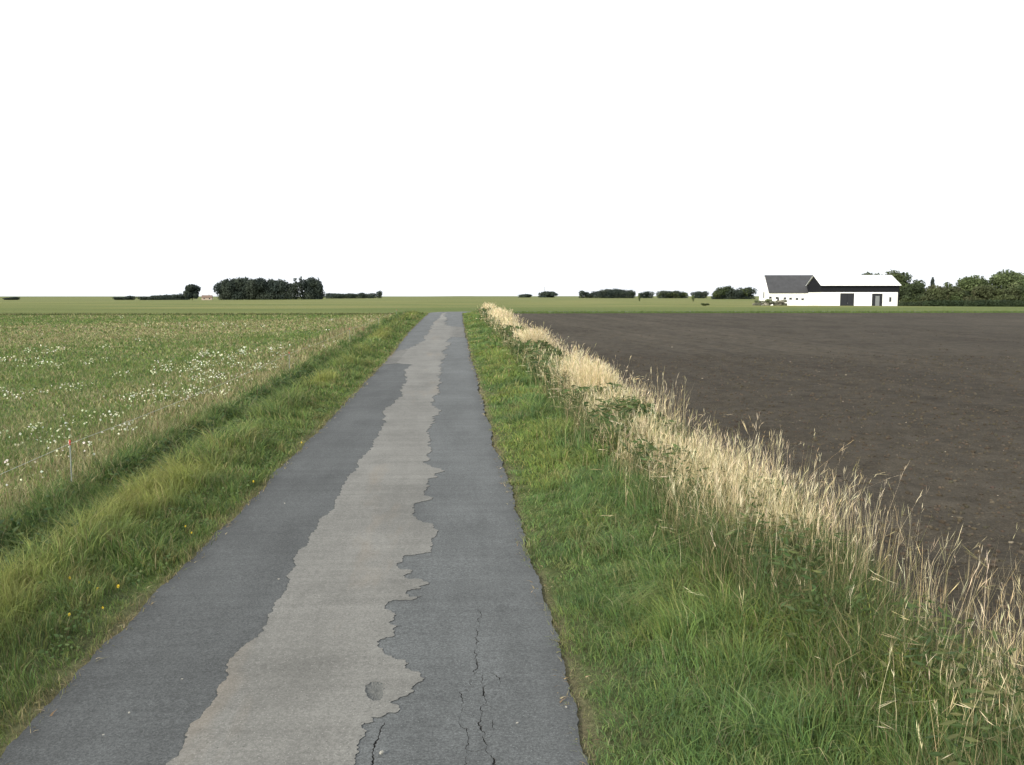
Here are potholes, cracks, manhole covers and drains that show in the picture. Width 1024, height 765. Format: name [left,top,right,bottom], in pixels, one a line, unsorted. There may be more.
crack [459,601,501,765]
crack [371,722,385,765]
pothole [365,682,385,701]
